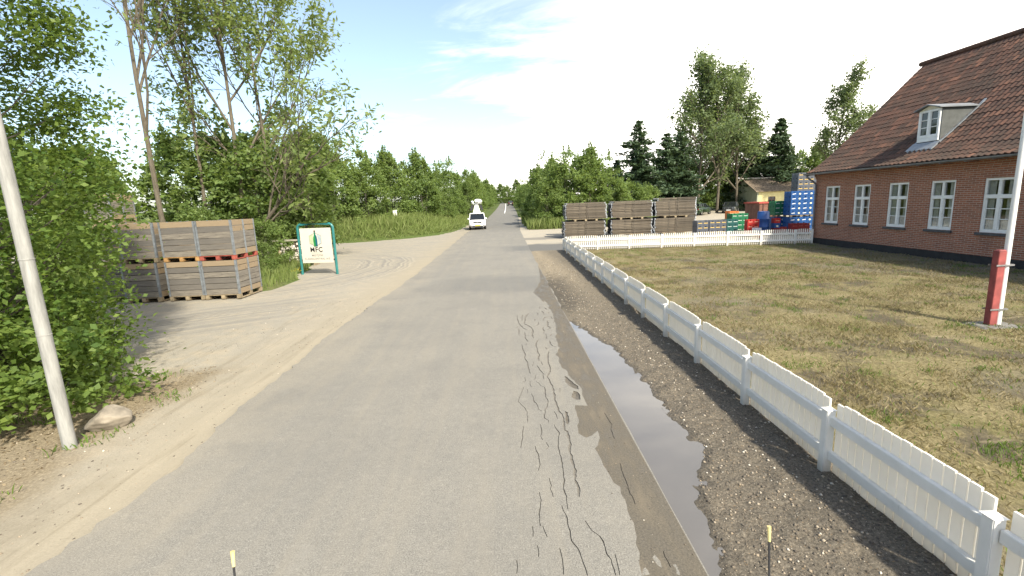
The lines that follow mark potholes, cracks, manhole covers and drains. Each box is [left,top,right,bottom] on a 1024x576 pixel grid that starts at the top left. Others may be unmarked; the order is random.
crack [516,307,620,576]
